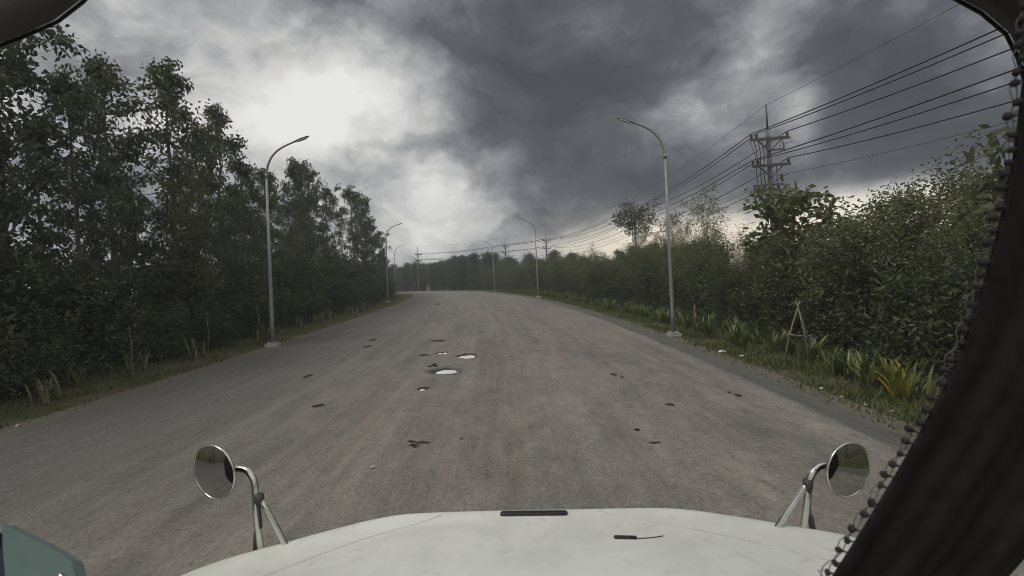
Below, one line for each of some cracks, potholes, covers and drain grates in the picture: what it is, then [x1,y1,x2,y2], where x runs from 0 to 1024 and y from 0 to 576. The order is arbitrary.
pothole [424,366,463,375]
